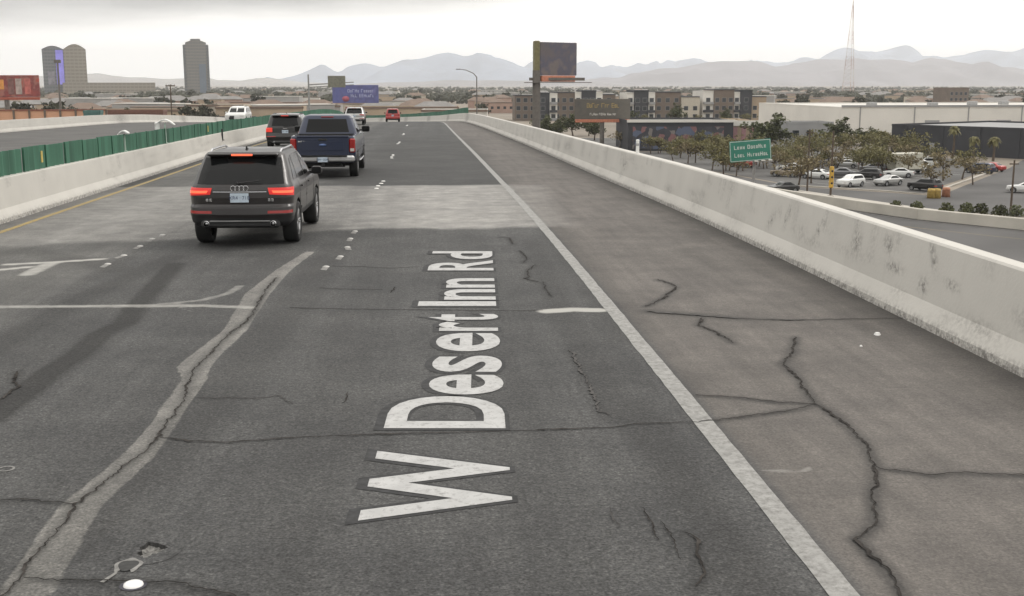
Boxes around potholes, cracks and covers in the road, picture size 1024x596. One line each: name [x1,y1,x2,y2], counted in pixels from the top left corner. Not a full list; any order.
crack [0,277,674,596]
crack [290,237,550,311]
crack [644,508,706,587]
crack [693,337,1024,596]
